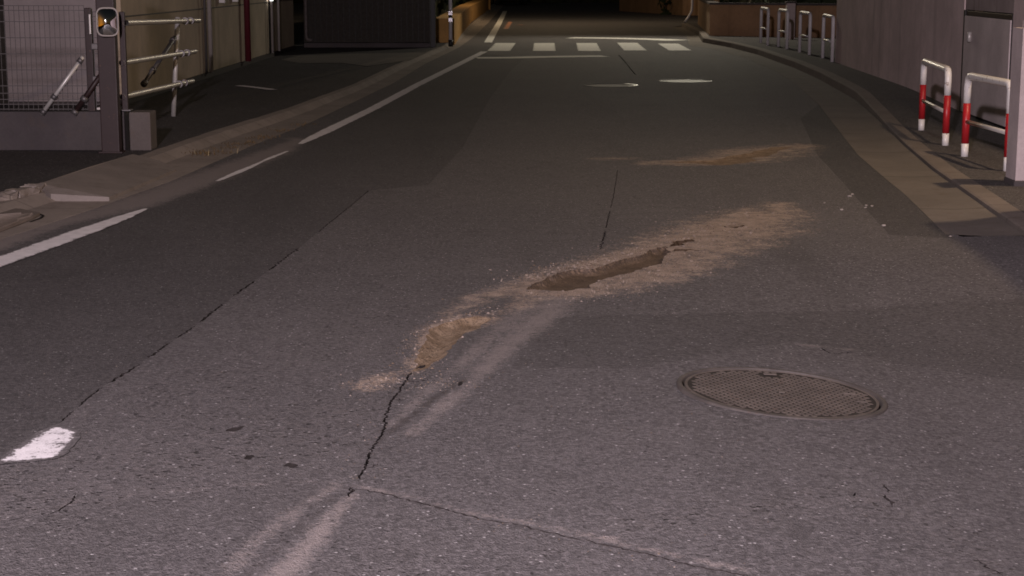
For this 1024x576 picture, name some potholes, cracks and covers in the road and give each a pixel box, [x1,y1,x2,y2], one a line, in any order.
crack [1,489,216,523]
crack [346,365,748,576]
crack [849,485,1003,576]
pothole [527,246,671,291]
pothole [413,316,491,371]
crack [600,170,618,250]
manhole cover [676,367,888,421]
